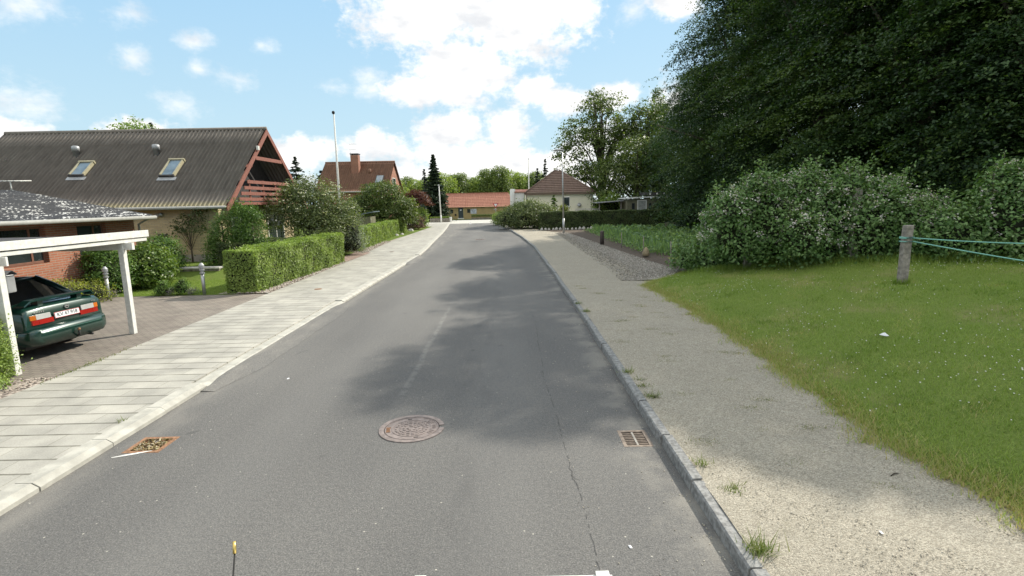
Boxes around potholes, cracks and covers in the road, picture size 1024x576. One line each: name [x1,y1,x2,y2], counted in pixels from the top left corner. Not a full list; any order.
drain grate [617,430,654,447]
crack [533,316,600,571]
drain grate [122,436,180,453]
manhole cover [379,415,444,443]
